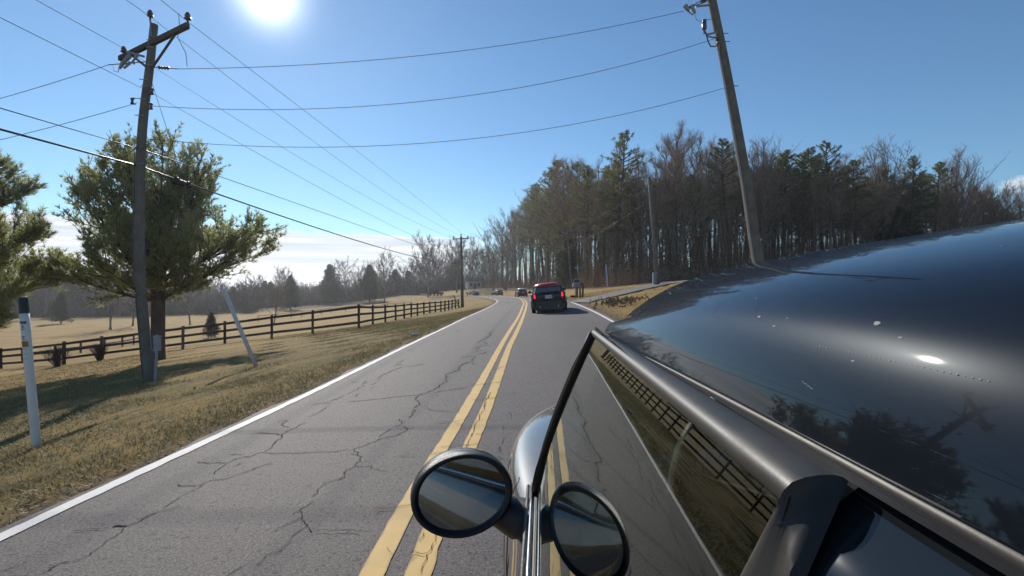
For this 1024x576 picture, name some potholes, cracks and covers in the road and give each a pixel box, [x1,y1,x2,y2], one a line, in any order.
crack [40,318,513,574]
